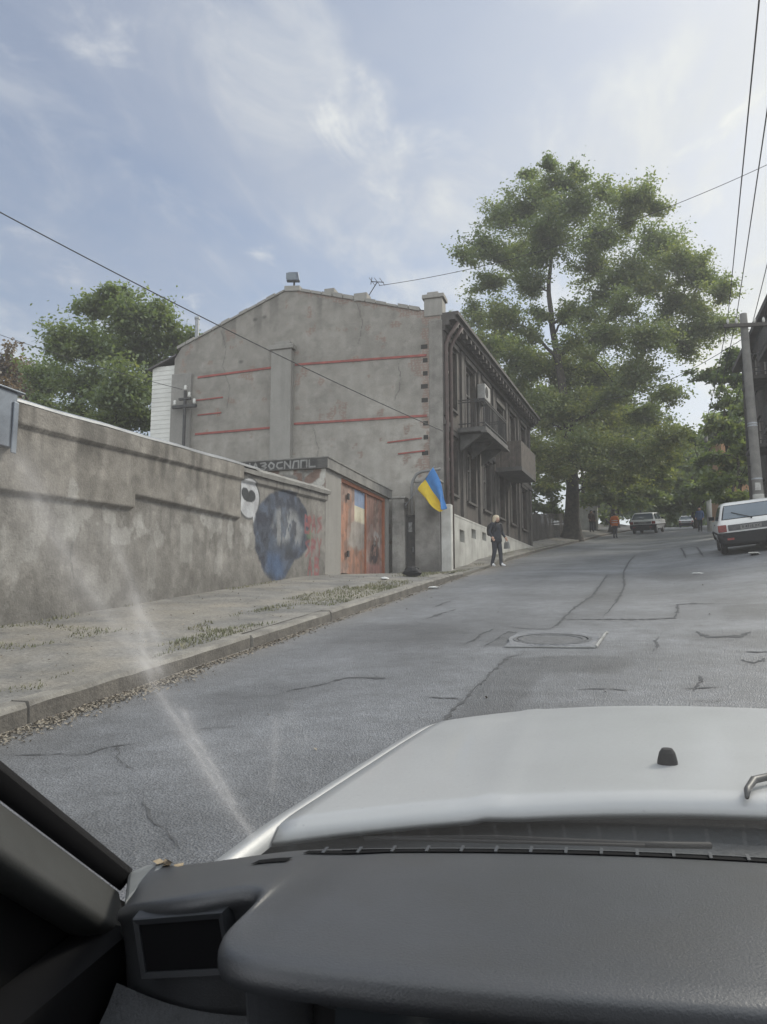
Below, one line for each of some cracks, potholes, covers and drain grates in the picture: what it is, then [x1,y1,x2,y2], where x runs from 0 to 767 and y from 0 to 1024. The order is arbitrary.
crack [697,631,767,663]
crack [693,676,723,701]
manhole cover [504,631,608,648]
crack [289,677,385,691]
crack [9,742,137,768]
crack [140,790,185,852]
